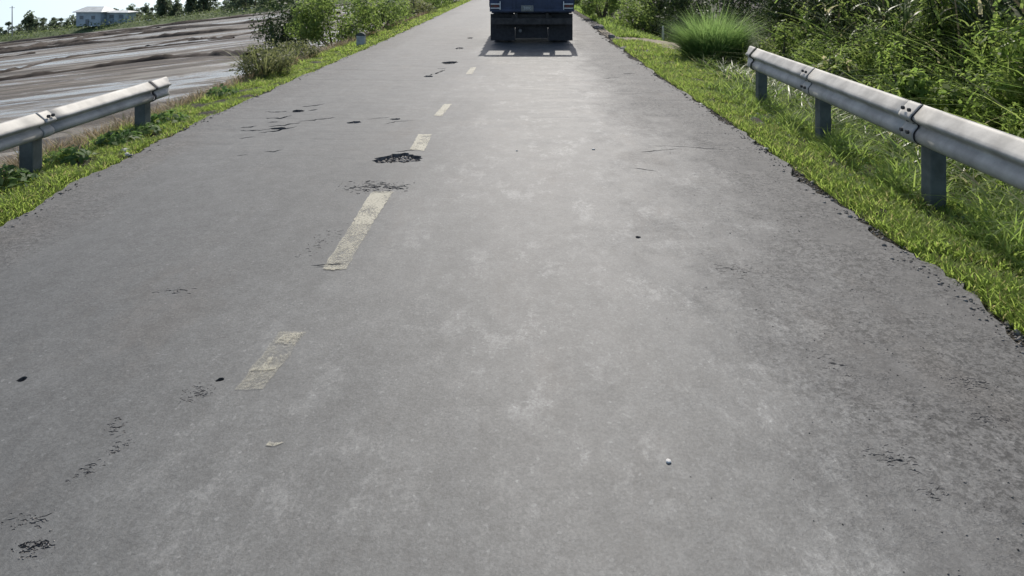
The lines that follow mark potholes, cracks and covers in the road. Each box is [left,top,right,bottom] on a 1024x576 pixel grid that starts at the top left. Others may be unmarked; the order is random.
crack [949,376,1009,426]
crack [636,146,723,171]
crack [1,509,55,559]
crack [63,417,135,482]
crack [237,104,334,156]
crack [863,444,960,506]
pothole [373,153,423,163]
